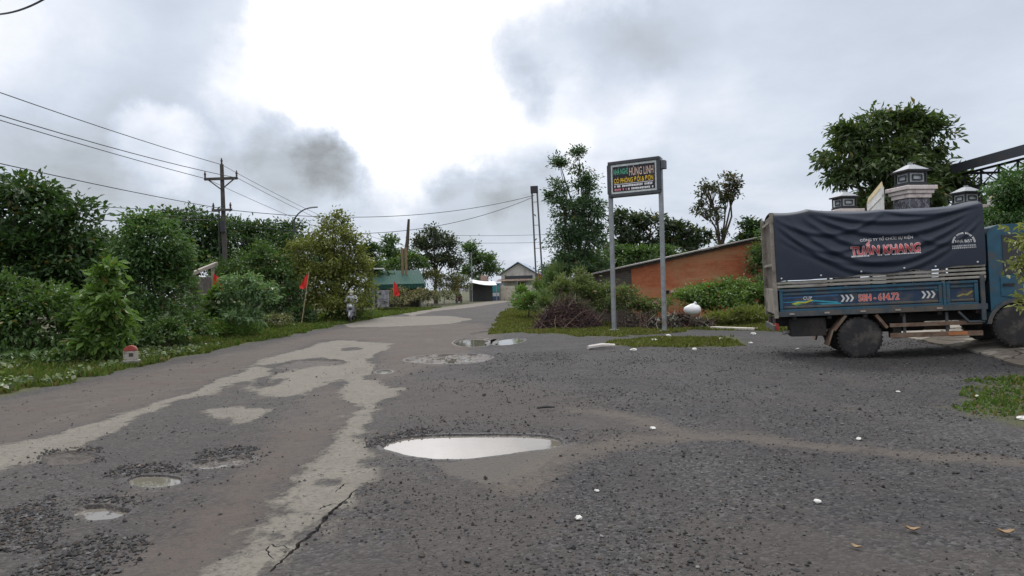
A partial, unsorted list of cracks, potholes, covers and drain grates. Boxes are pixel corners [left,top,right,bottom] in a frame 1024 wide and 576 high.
pothole [40,450,99,465]
pothole [405,354,492,364]
pothole [68,504,132,520]
crack [265,483,357,572]
pothole [189,455,254,469]
pothole [127,475,182,488]
pothole [381,434,563,459]
pothole [453,338,490,347]
